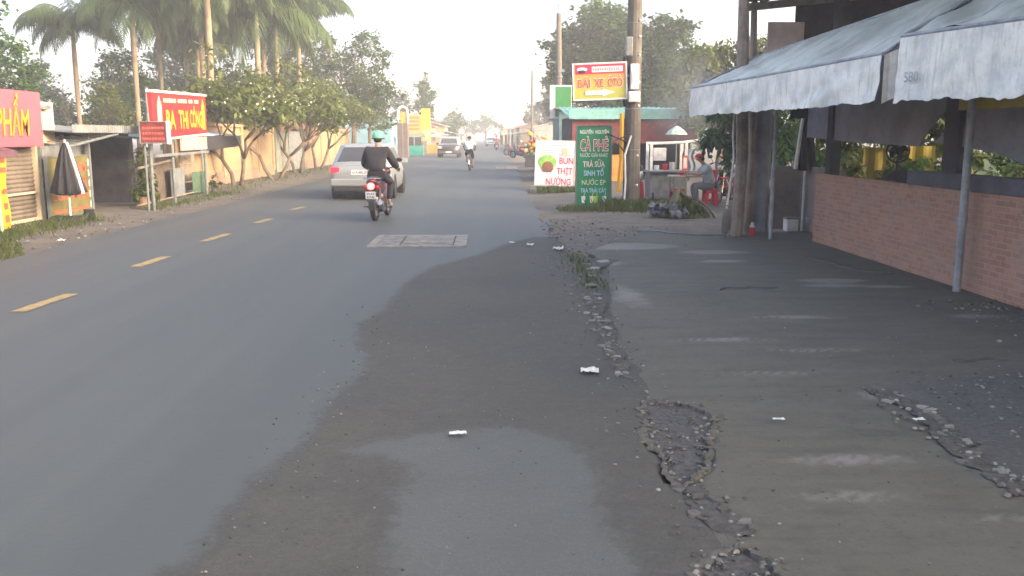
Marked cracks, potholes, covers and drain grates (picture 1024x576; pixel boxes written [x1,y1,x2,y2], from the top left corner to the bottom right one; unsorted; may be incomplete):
manhole cover [366,235,468,248]
pothole [634,397,727,488]
crack [719,254,896,291]
pothole [685,541,802,576]
